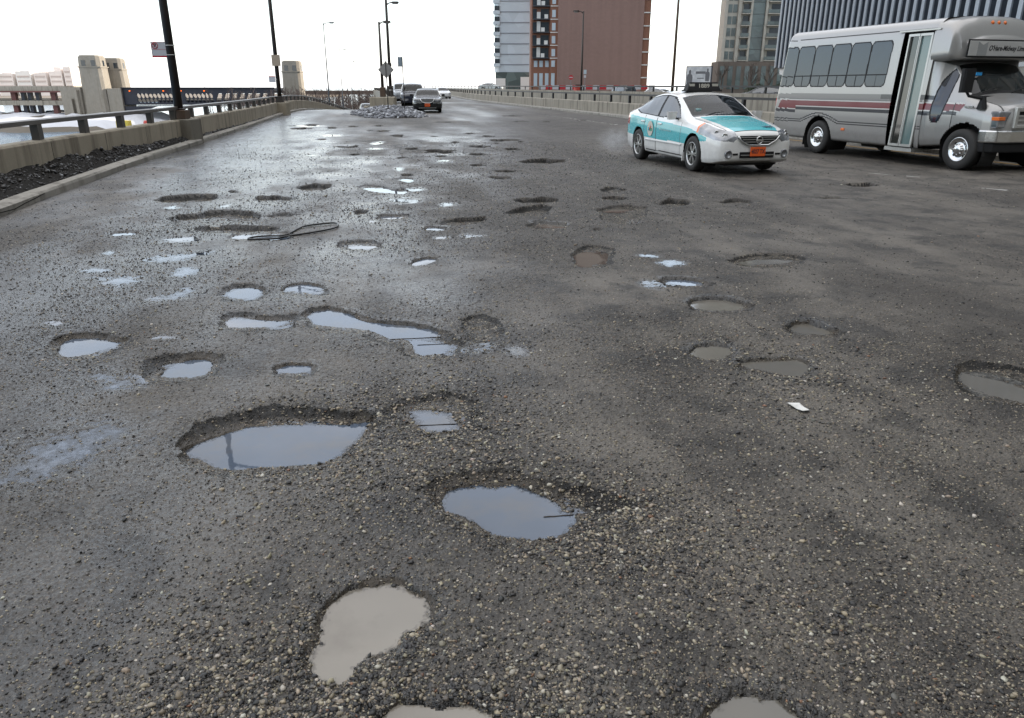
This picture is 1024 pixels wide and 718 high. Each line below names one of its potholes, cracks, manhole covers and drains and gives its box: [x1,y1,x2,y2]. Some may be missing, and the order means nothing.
pothole [47,331,133,361]
pothole [381,391,485,439]
pothole [217,283,270,304]
pothole [175,403,382,479]
pothole [382,699,494,718]
pothole [140,351,226,384]
pothole [271,362,318,379]
pothole [687,346,736,364]
pothole [155,194,218,203]
pothole [953,360,1024,409]
pothole [728,254,806,269]
pothole [736,356,814,378]
